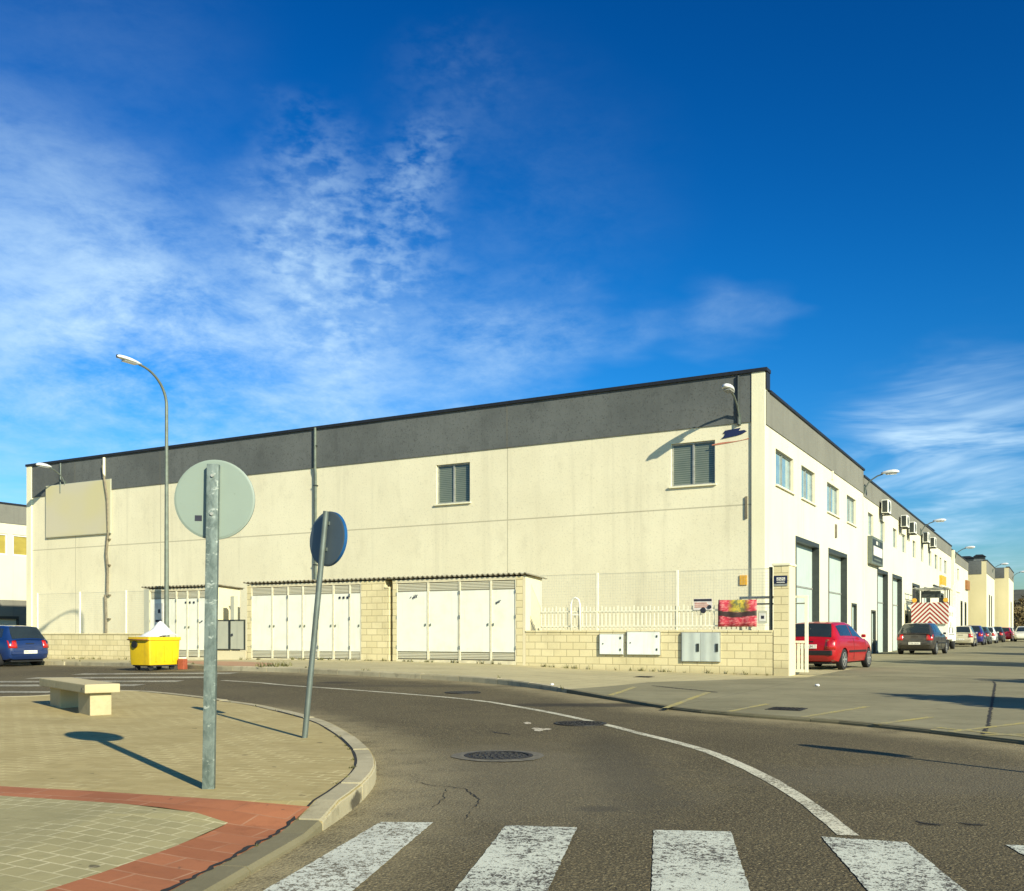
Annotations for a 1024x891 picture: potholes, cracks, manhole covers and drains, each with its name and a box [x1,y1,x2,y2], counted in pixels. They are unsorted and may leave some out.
manhole cover [451,750,544,762]
crack [416,781,480,817]
